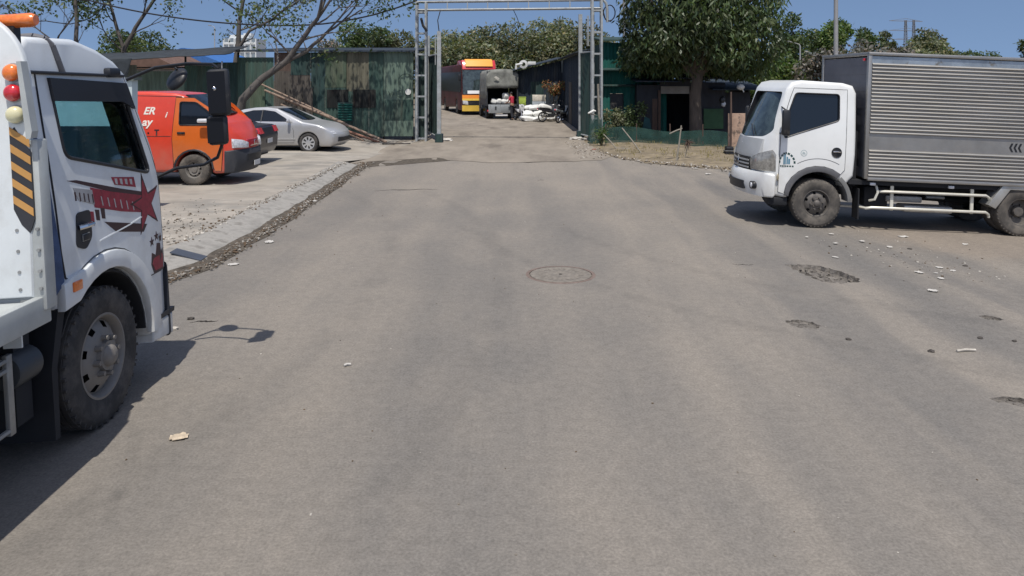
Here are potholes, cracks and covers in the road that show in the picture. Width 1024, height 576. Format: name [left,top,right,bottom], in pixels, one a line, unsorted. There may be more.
manhole cover [526,266,596,284]
pothole [989,396,1024,407]
pothole [787,264,860,284]
pothole [786,320,820,329]
